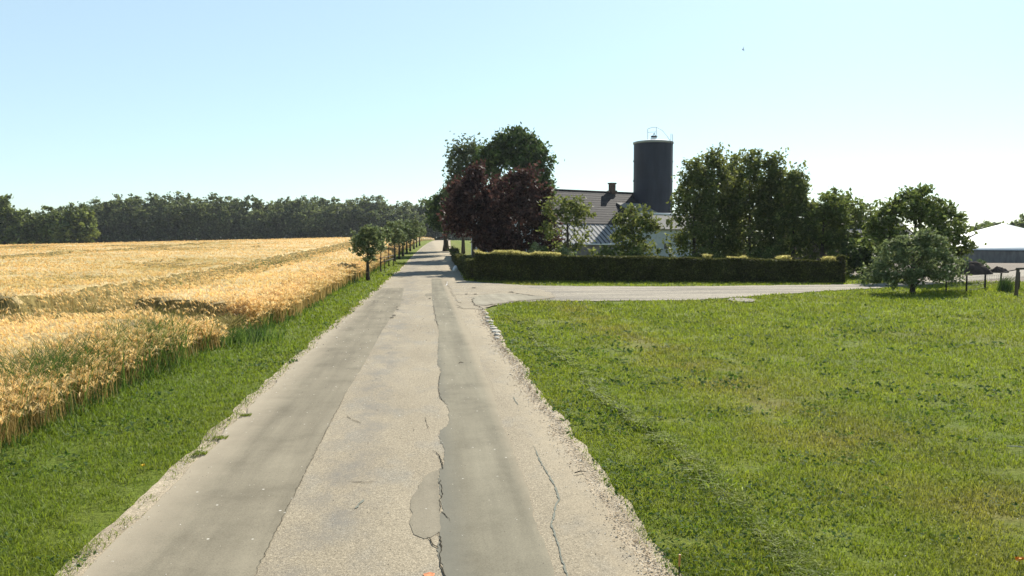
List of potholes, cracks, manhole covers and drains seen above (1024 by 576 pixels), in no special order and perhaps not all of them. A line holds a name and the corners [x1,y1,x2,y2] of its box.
crack [428,451,450,576]
